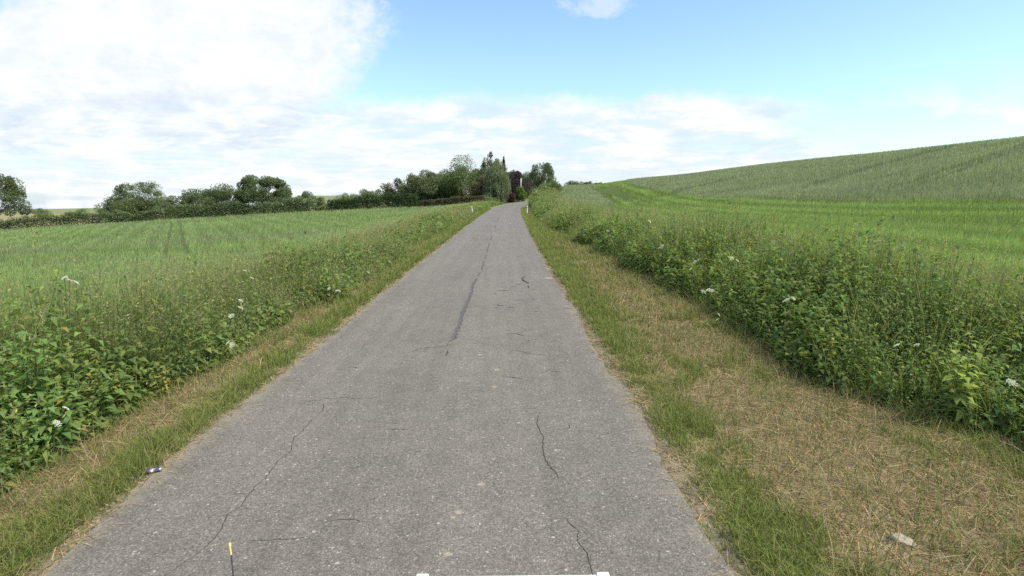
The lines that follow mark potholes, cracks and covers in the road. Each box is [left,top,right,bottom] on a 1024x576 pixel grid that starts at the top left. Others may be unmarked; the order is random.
crack [496,276,537,312]
crack [412,217,499,355]
crack [567,520,593,575]
crack [165,391,398,576]
crack [527,413,559,480]
